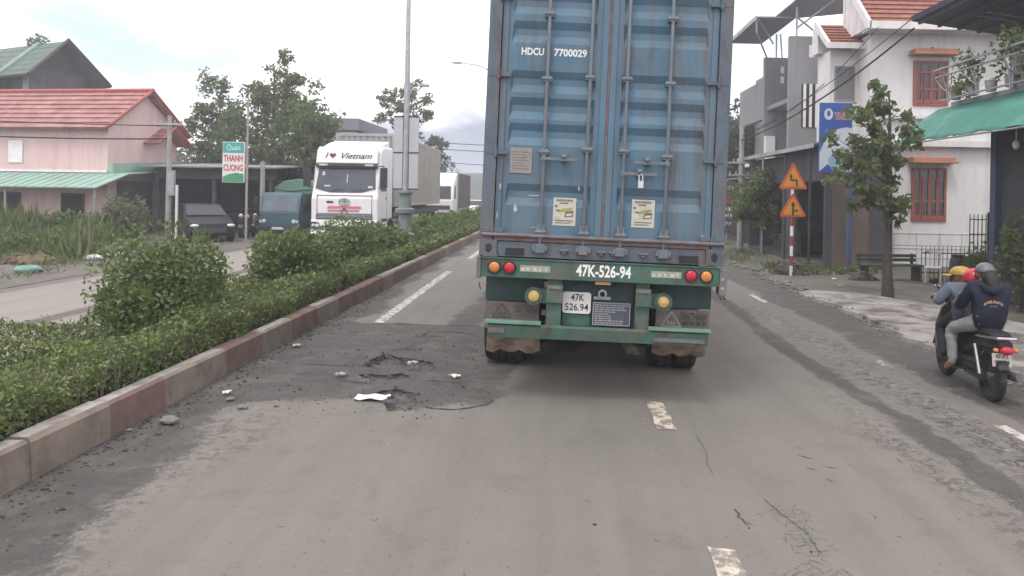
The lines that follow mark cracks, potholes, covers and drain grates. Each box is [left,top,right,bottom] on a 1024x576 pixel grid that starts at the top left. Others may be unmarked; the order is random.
pothole [361,351,436,371]
pothole [372,385,423,412]
crack [763,497,851,576]
